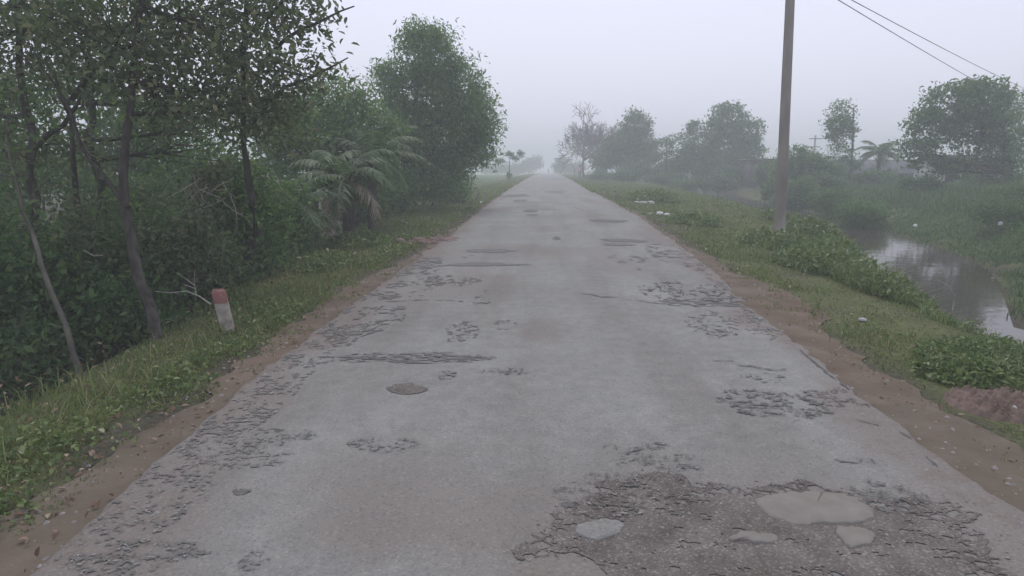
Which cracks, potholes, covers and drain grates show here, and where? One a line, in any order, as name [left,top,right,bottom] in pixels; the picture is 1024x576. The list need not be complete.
pothole [512,470,1015,576]
crack [592,245,878,424]
